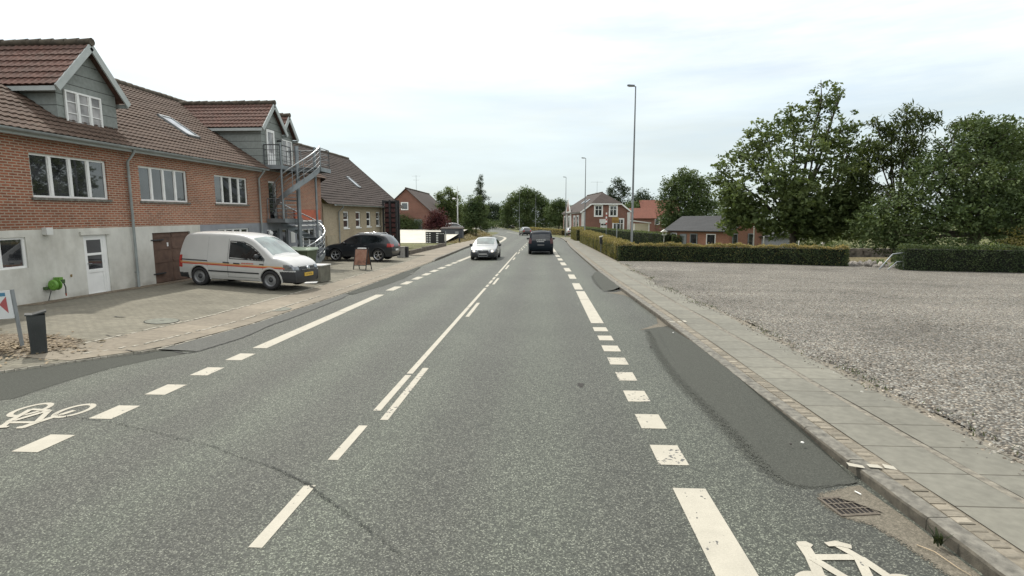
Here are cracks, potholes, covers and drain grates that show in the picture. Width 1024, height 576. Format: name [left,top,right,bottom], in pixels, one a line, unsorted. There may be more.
drain grate [817,495,881,517]
